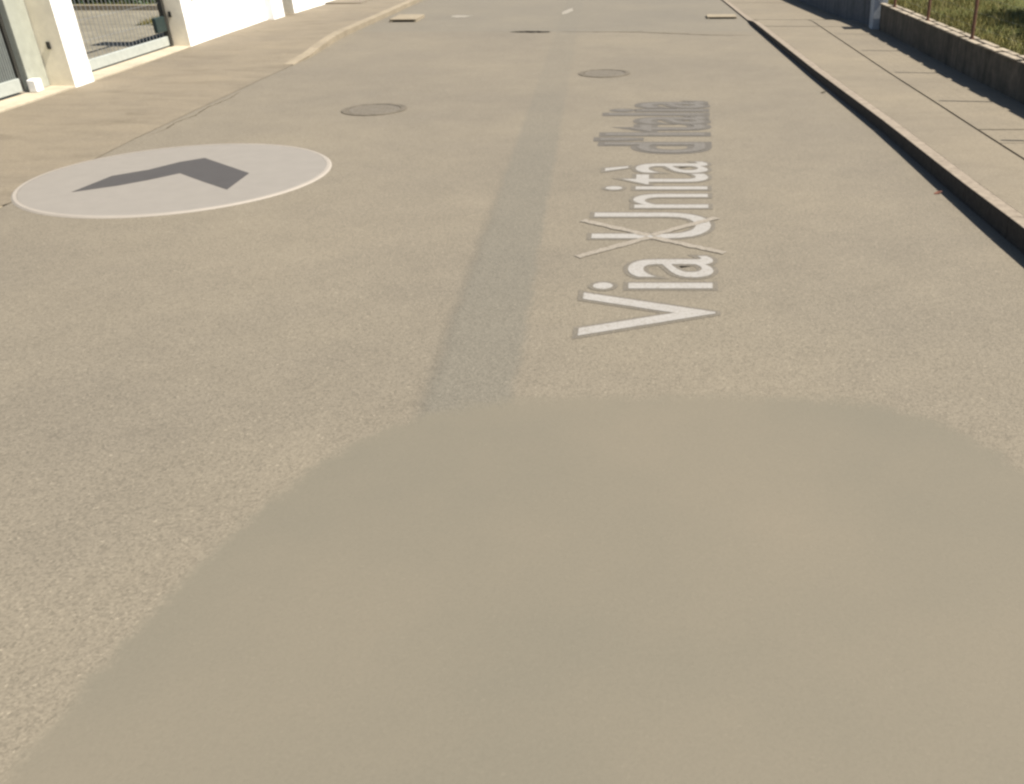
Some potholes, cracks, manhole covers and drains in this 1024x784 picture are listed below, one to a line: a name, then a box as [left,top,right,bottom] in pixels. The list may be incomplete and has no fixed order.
manhole cover [578,69,630,78]
manhole cover [341,103,407,116]
